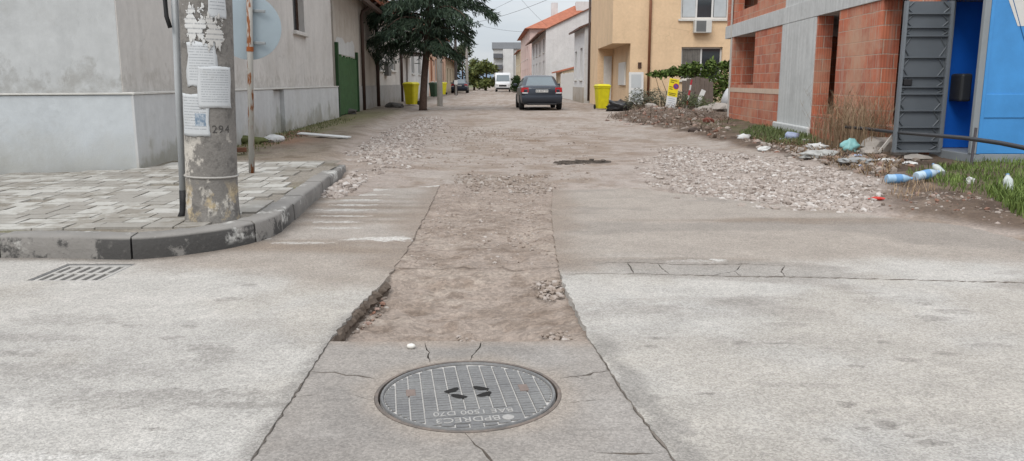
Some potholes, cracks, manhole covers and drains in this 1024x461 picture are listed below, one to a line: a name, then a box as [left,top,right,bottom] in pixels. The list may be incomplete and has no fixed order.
crack [566,341,675,461]
manhole cover [374,360,561,434]
pothole [331,266,588,342]
drain grate [28,264,134,281]
crack [251,341,373,461]
crack [471,440,493,461]
